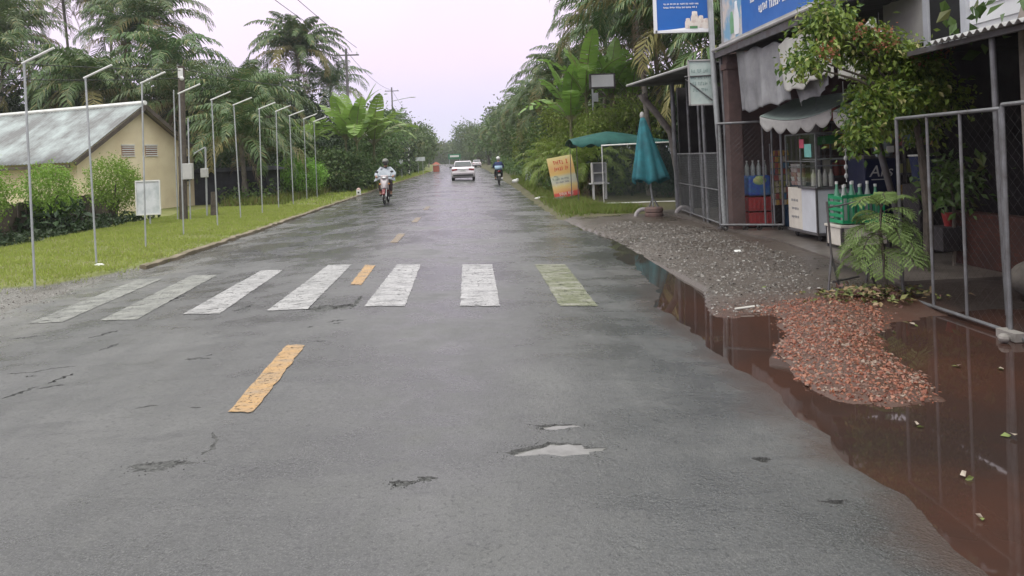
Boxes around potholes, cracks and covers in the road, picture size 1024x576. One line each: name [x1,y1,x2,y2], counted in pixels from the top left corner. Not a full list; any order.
pothole [383,476,437,489]
pothole [497,442,627,459]
crack [2,366,75,399]
crack [88,330,119,350]
pothole [527,422,590,432]
pothole [121,432,219,476]
